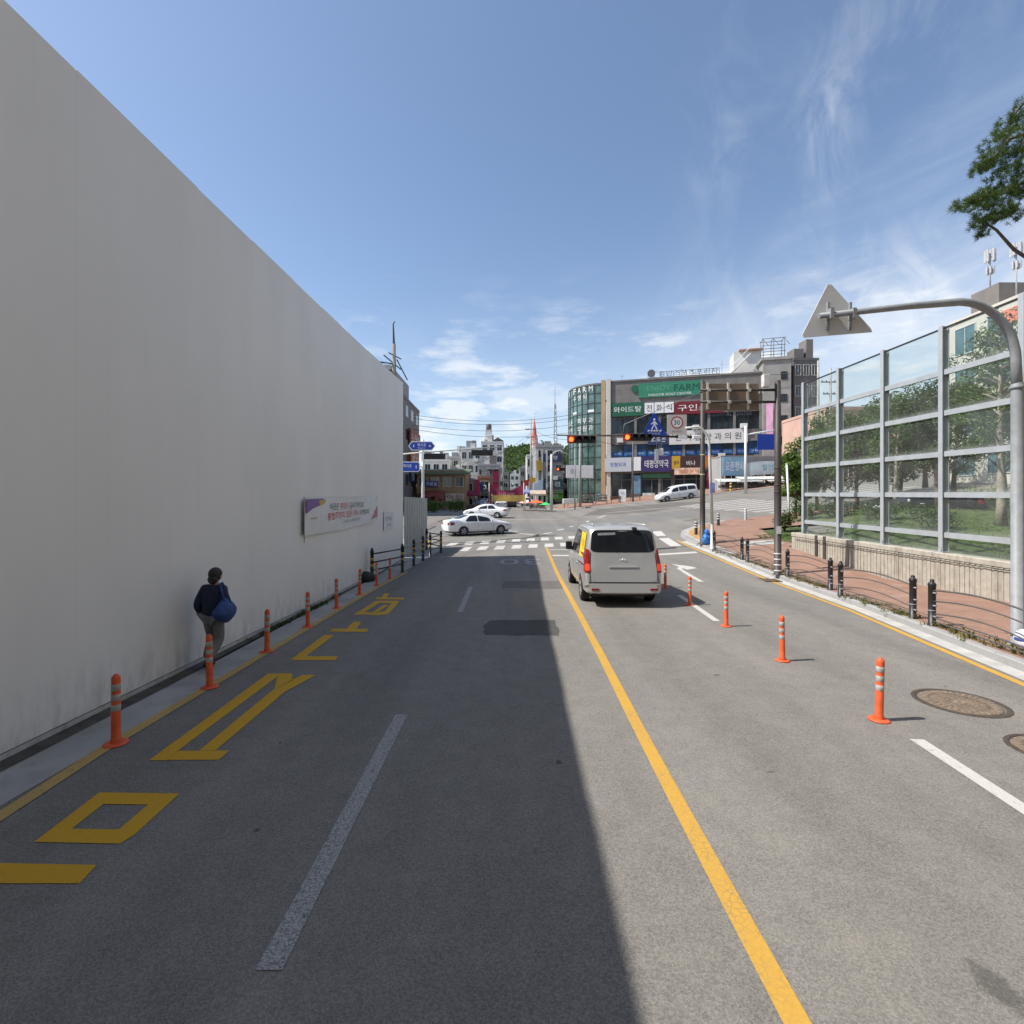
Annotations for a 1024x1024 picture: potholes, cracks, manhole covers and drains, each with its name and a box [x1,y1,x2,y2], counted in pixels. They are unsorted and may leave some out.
manhole cover [1003,734,1024,754]
manhole cover [910,688,1014,718]
